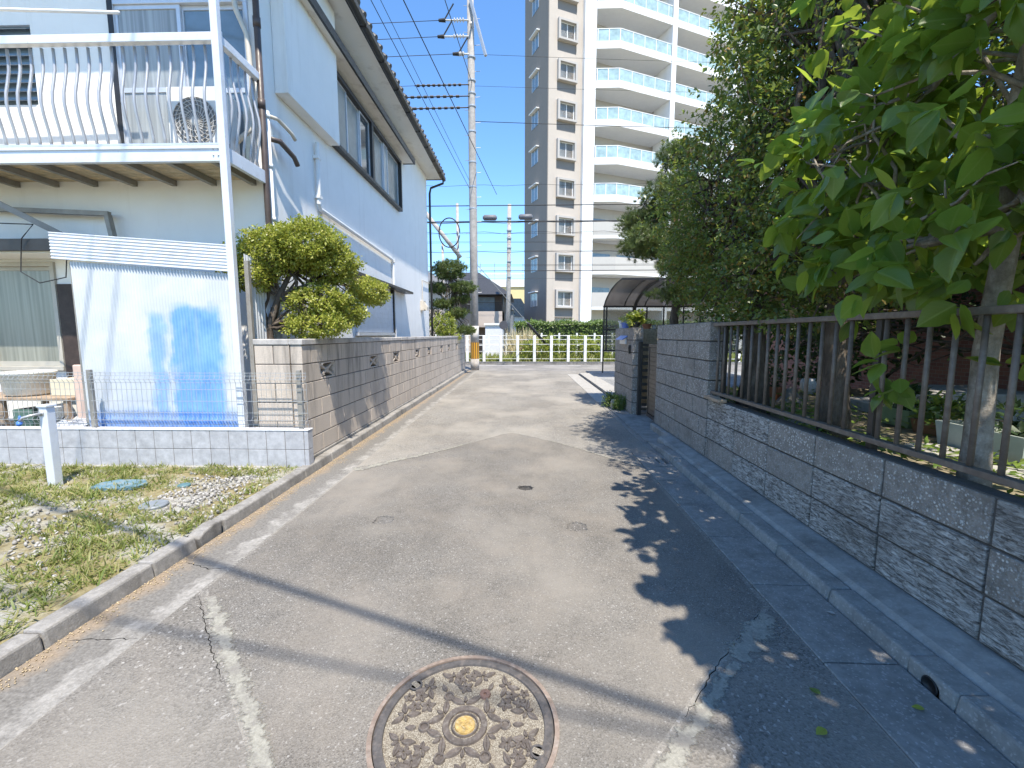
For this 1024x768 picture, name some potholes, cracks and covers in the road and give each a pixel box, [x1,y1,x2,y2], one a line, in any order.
manhole cover [366,655,560,768]
